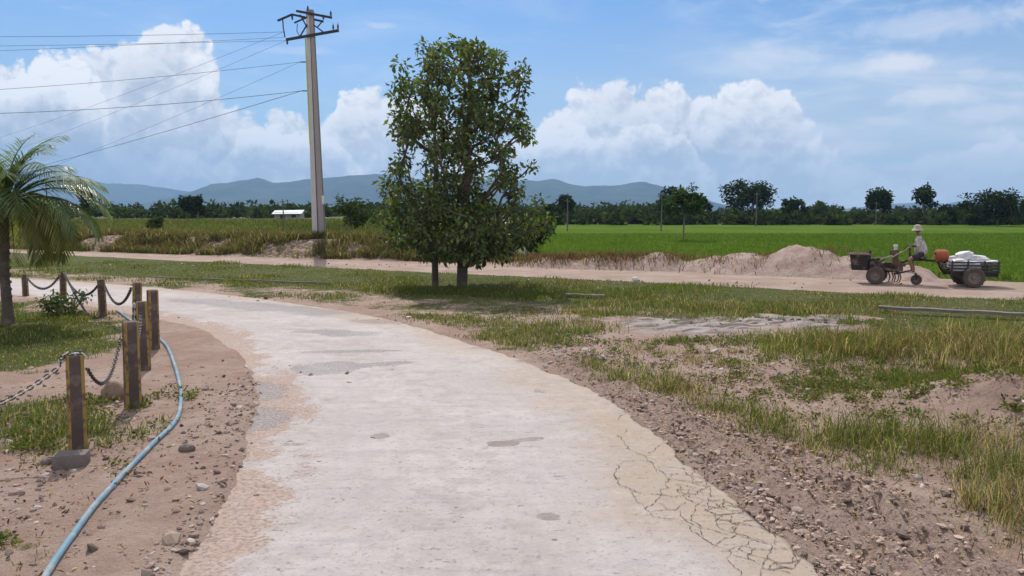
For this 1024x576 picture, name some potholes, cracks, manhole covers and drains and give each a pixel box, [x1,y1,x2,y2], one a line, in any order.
crack [624,468,804,576]
crack [613,410,663,492]
